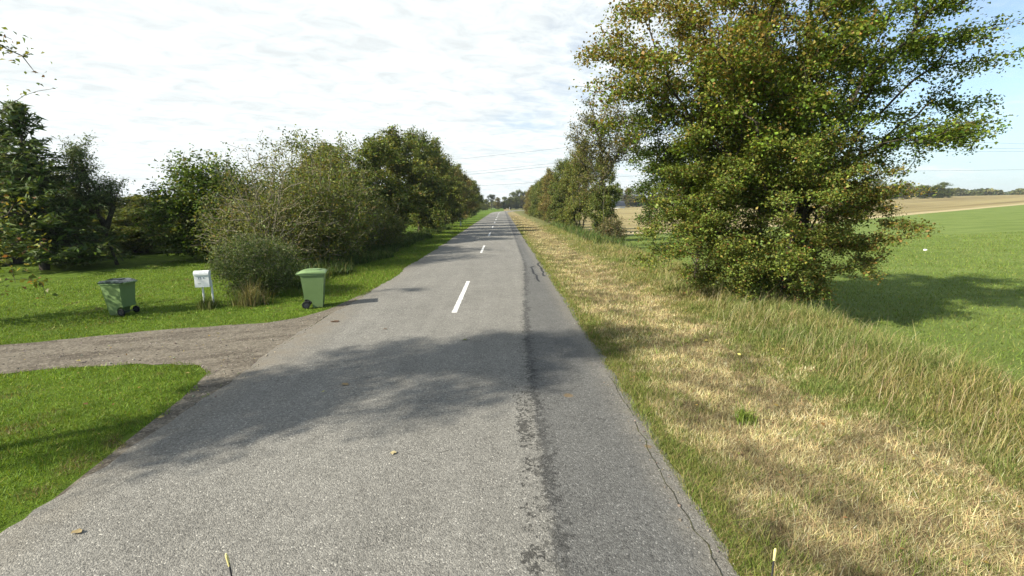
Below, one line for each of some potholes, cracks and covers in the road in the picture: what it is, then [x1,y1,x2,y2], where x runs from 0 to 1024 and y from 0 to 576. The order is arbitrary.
crack [610,378,722,575]
crack [530,263,545,282]
